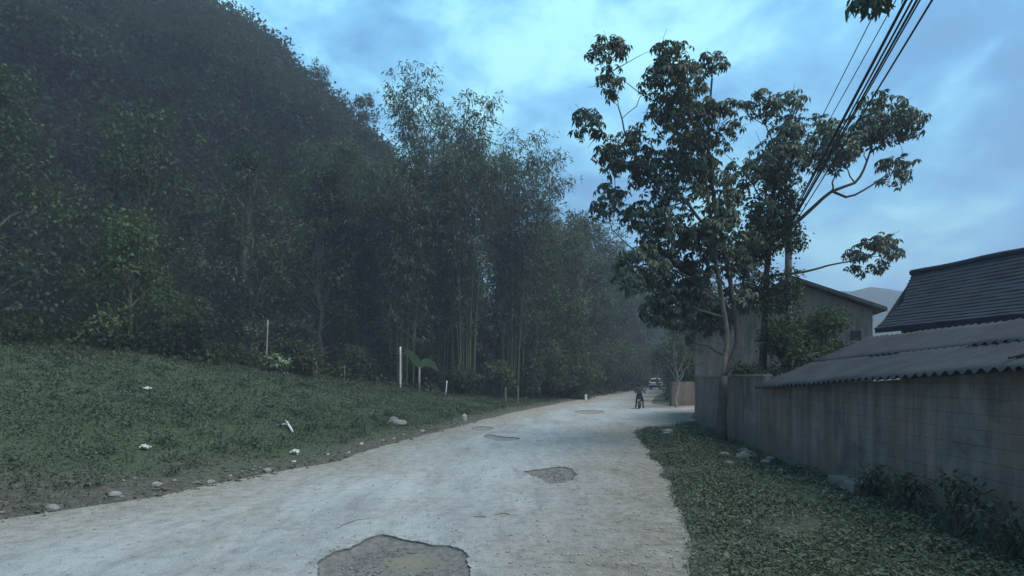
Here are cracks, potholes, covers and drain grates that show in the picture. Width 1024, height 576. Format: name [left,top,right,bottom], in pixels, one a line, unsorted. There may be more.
pothole [317,534,471,576]
pothole [525,466,578,484]
